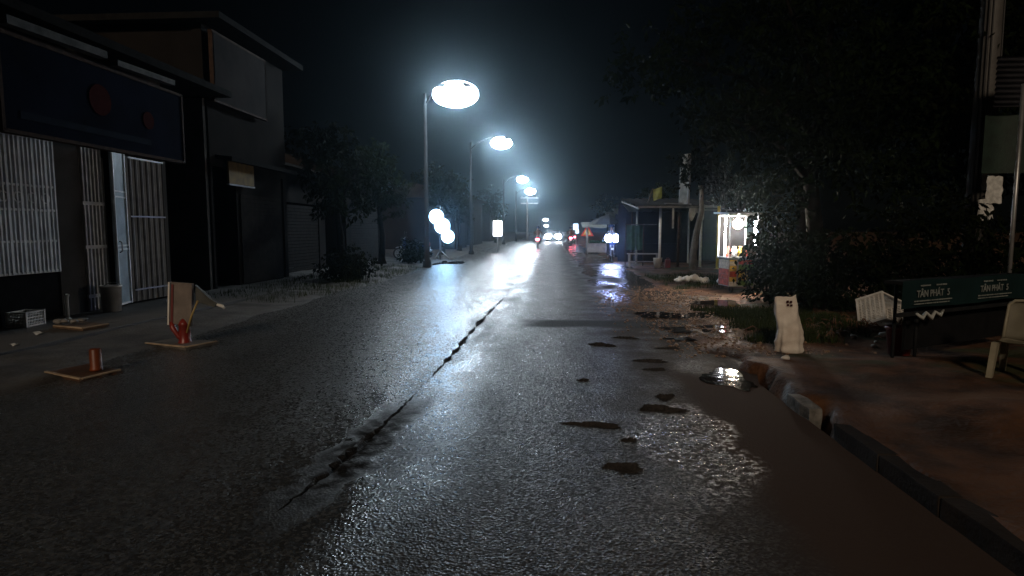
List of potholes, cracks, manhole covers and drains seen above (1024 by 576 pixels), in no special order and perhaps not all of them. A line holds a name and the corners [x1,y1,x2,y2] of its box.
pothole [637,404,691,413]
pothole [600,462,644,473]
crack [277,267,529,511]
pothole [560,421,621,429]
